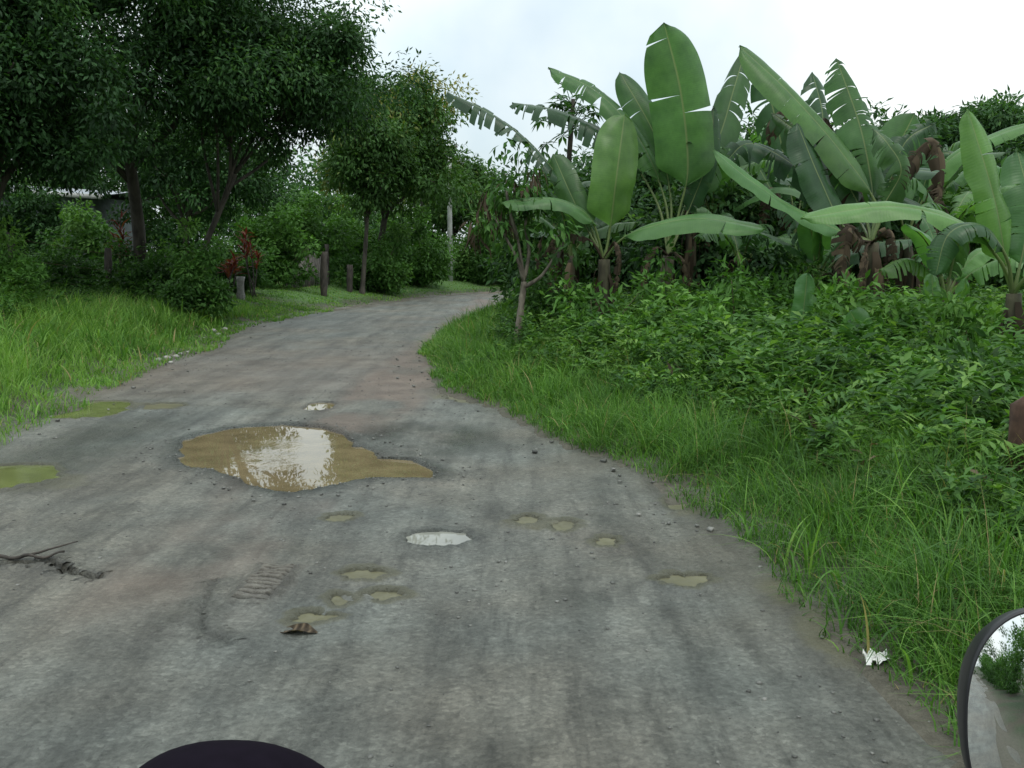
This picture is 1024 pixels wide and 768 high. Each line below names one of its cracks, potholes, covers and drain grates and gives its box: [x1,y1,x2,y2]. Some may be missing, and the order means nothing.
pothole [387,525,490,552]
pothole [496,511,559,530]
pothole [145,421,464,501]
pothole [535,515,593,537]
pothole [341,583,426,609]
pothole [126,401,195,411]
pothole [308,510,372,526]
pothole [319,562,409,586]
pothole [306,588,374,615]
pothole [37,399,145,421]
crack [0,554,113,583]
pothole [268,604,363,630]
